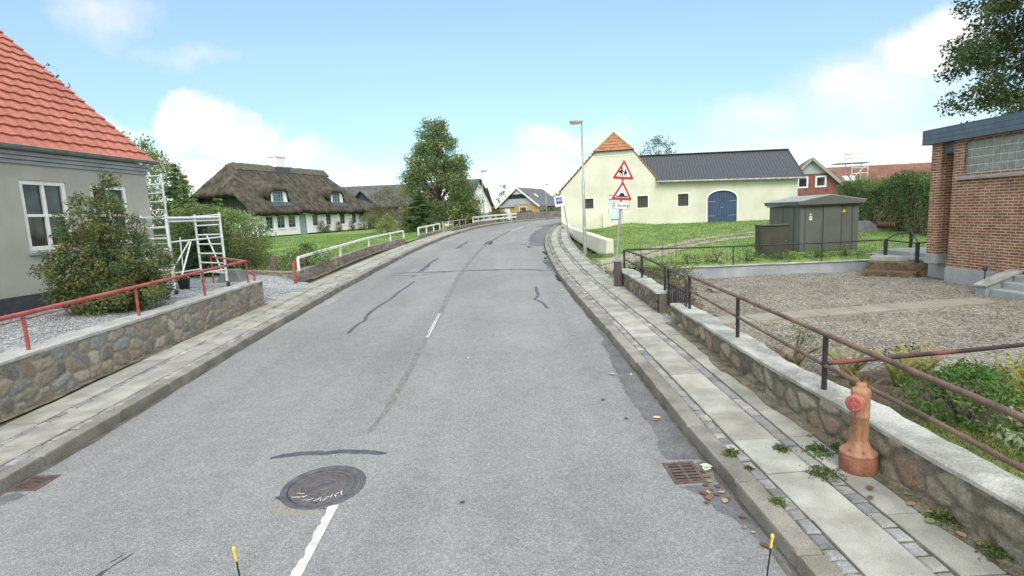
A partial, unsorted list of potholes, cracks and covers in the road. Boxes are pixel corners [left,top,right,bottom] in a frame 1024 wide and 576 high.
drain grate [662,461,708,484]
manhole cover [280,465,366,510]
drain grate [7,474,61,492]
